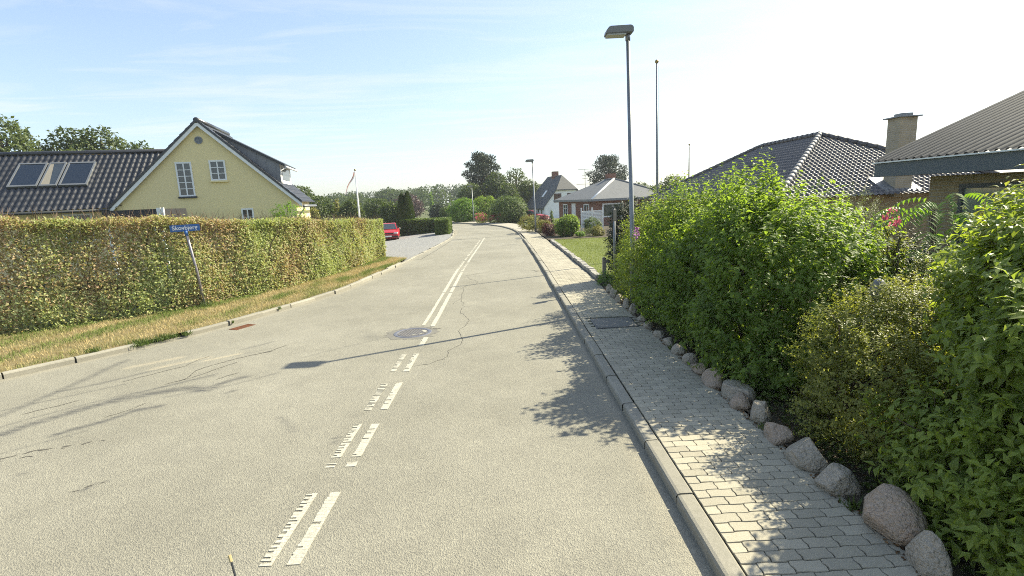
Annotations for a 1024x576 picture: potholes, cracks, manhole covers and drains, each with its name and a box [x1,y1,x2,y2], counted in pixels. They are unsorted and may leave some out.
crack [0,440,102,462]
manhole cover [384,326,440,340]
utility cover [590,317,639,329]
